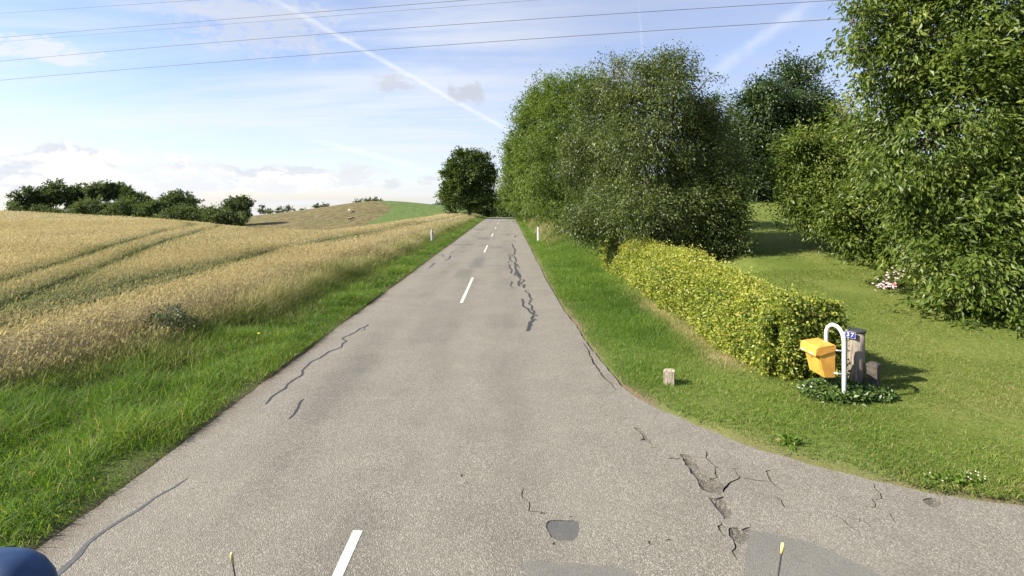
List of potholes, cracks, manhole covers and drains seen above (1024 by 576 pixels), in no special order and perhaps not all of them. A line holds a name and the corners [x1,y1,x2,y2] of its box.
crack [633,424,786,508]
pothole [923,498,941,507]
crack [833,485,895,533]
crack [583,342,616,390]
crack [717,522,751,559]
